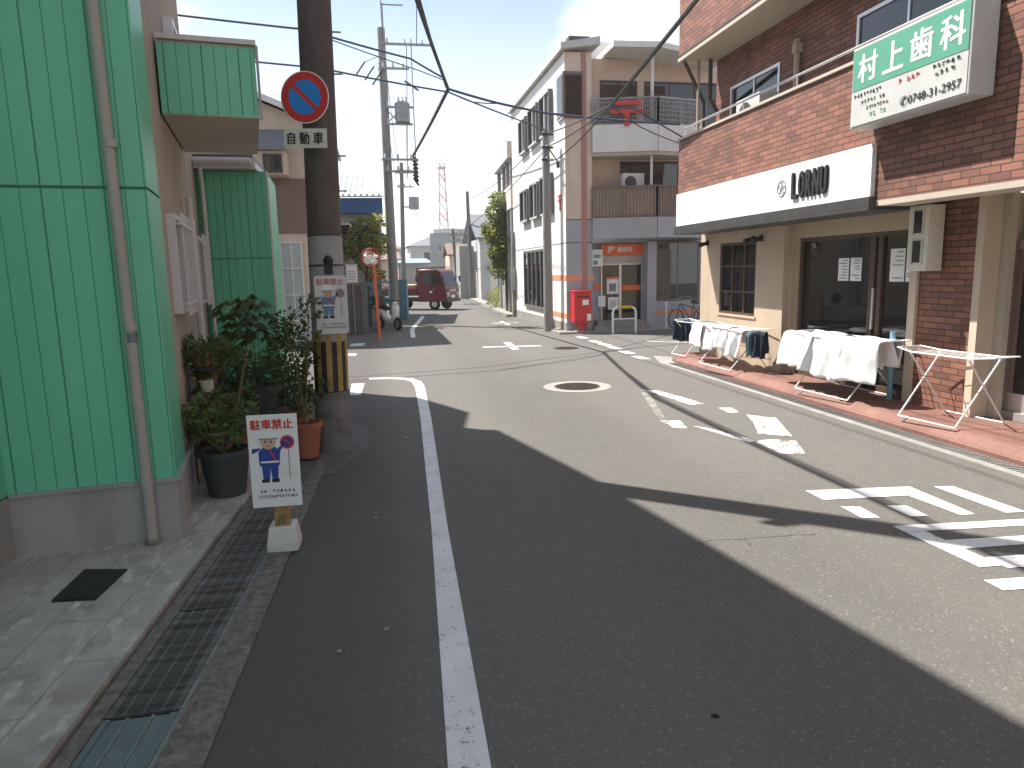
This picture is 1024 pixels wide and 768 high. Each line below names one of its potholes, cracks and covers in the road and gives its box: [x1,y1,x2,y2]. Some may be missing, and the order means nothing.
manhole cover [543,381,611,392]
